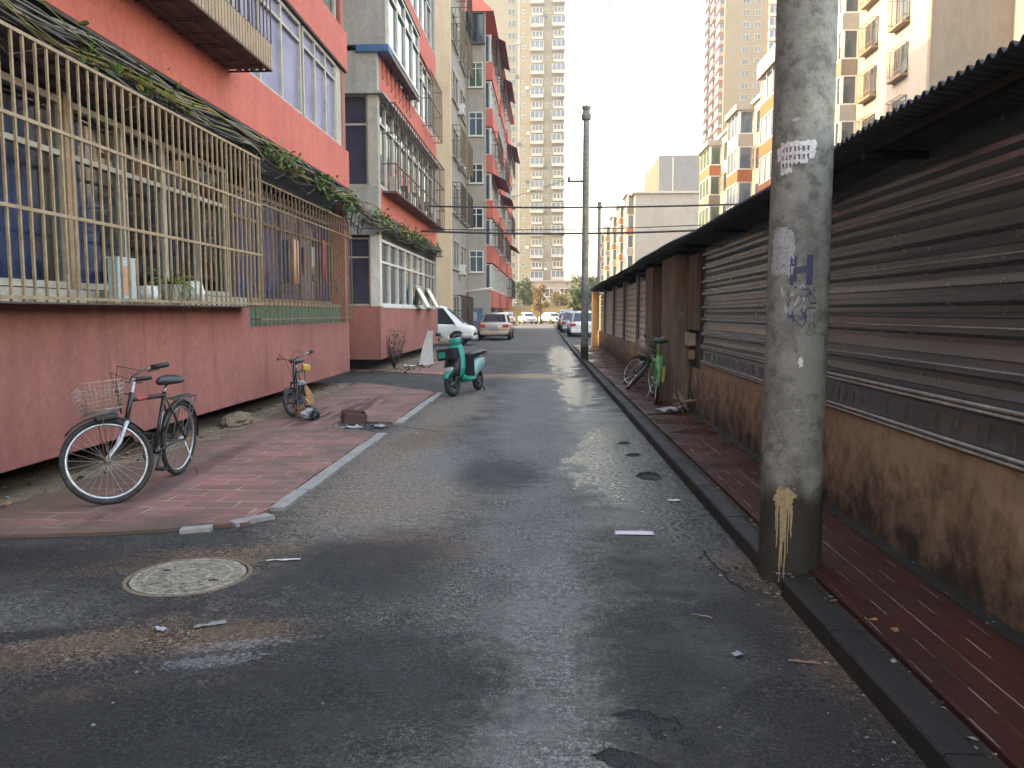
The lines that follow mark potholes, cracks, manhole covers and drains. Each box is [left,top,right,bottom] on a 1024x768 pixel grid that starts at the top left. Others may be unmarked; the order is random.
pothole [610,709,684,741]
manhole cover [122,557,253,597]
pothole [591,747,664,768]
pothole [635,471,662,481]
crack [703,549,745,592]
